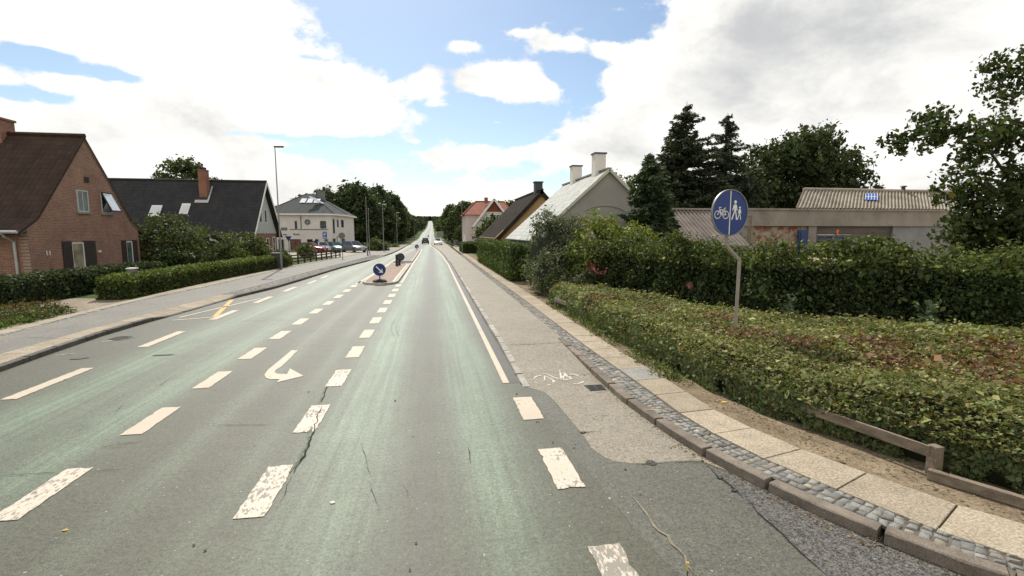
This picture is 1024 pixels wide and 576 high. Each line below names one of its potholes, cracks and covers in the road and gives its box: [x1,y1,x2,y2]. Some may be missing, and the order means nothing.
crack [631,495,695,574]
crack [281,385,328,500]
